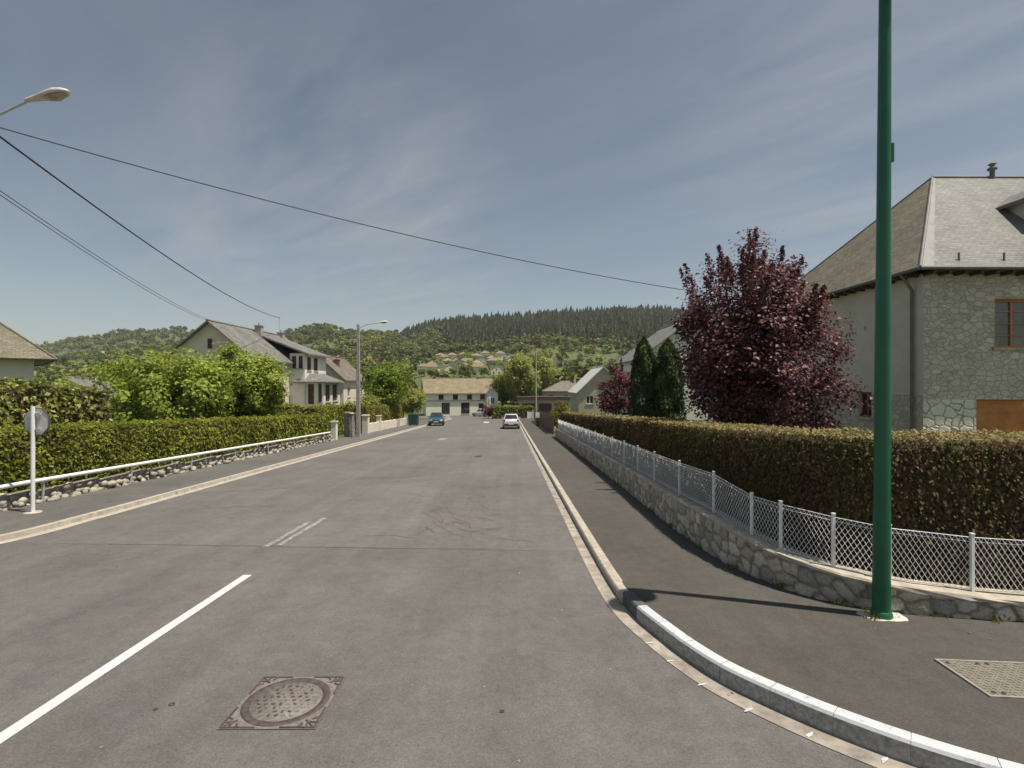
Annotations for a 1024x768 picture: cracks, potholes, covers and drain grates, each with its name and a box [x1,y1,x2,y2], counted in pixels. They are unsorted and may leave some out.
crack [367,475,538,543]
manhole cover [217,676,346,730]
manhole cover [934,658,1024,699]
